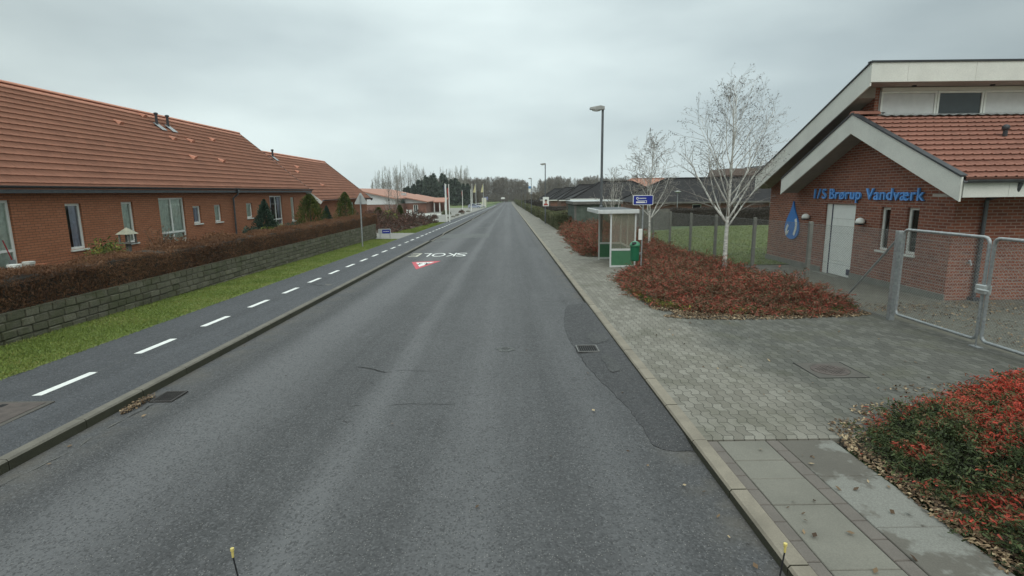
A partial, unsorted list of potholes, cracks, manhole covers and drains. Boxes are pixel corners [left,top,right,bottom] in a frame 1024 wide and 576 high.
manhole cover [794,362,870,378]
drain grate [149,391,188,403]
